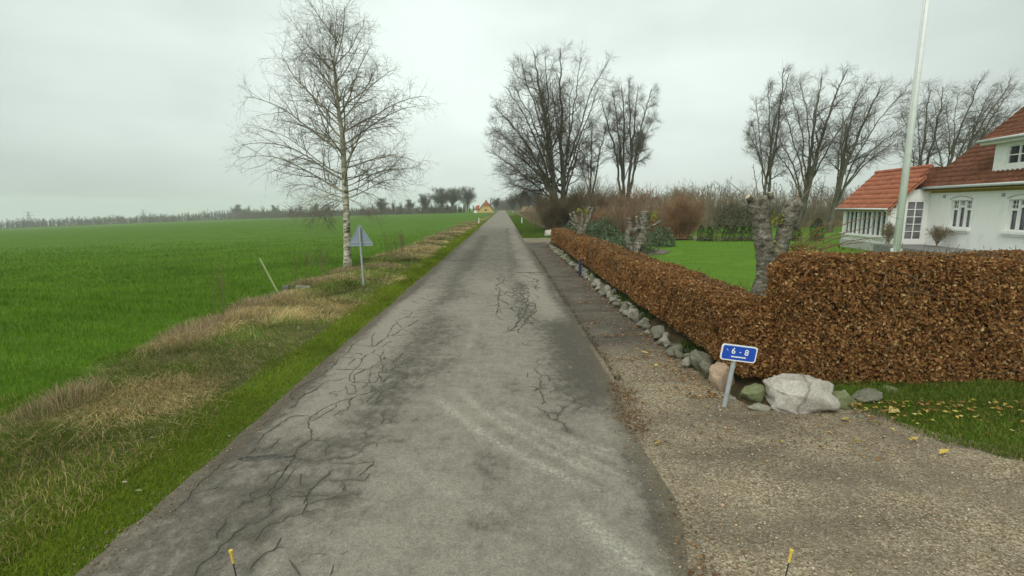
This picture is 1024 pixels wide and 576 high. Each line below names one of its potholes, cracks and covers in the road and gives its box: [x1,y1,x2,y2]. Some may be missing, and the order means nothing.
crack [491,272,583,432]
crack [175,298,431,576]
